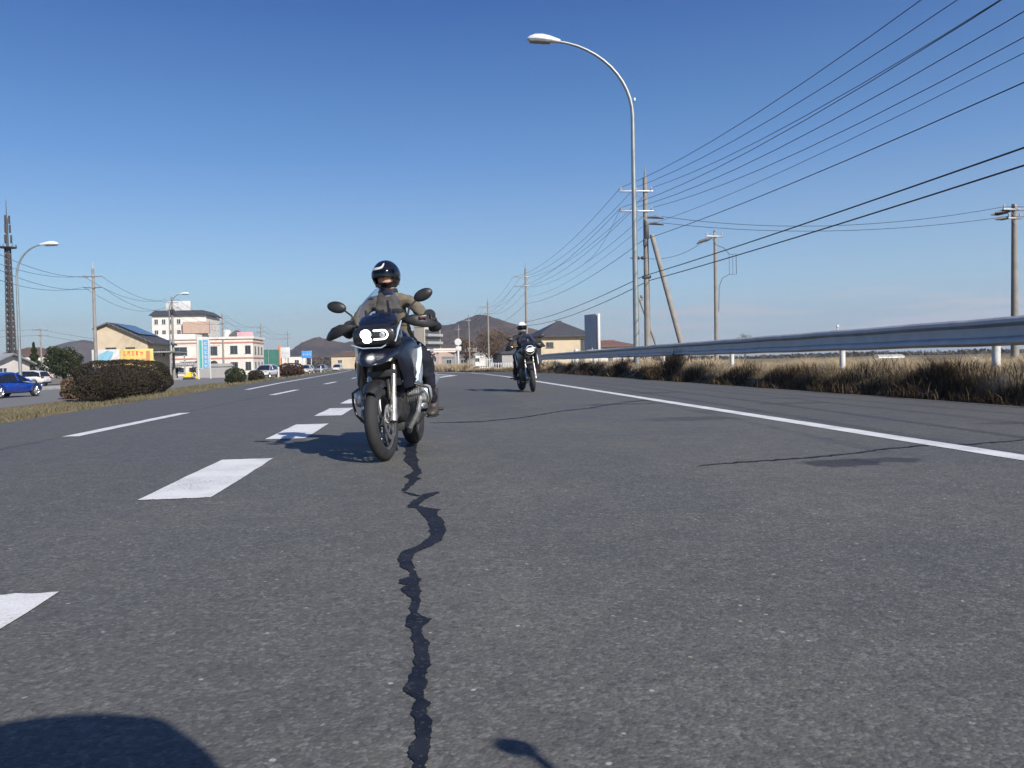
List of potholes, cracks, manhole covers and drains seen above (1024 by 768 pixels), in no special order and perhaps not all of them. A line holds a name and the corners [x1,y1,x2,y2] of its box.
crack [437,400,644,423]
crack [699,440,1020,466]
